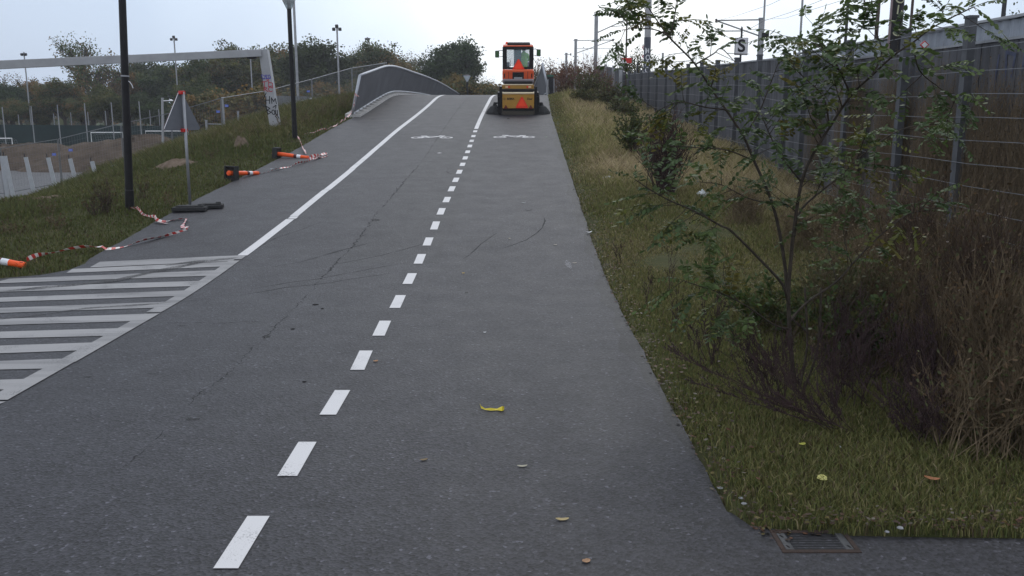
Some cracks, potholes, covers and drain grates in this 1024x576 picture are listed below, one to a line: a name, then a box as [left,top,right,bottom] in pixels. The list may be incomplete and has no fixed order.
crack [177,171,414,403]
drain grate [769,530,862,553]
